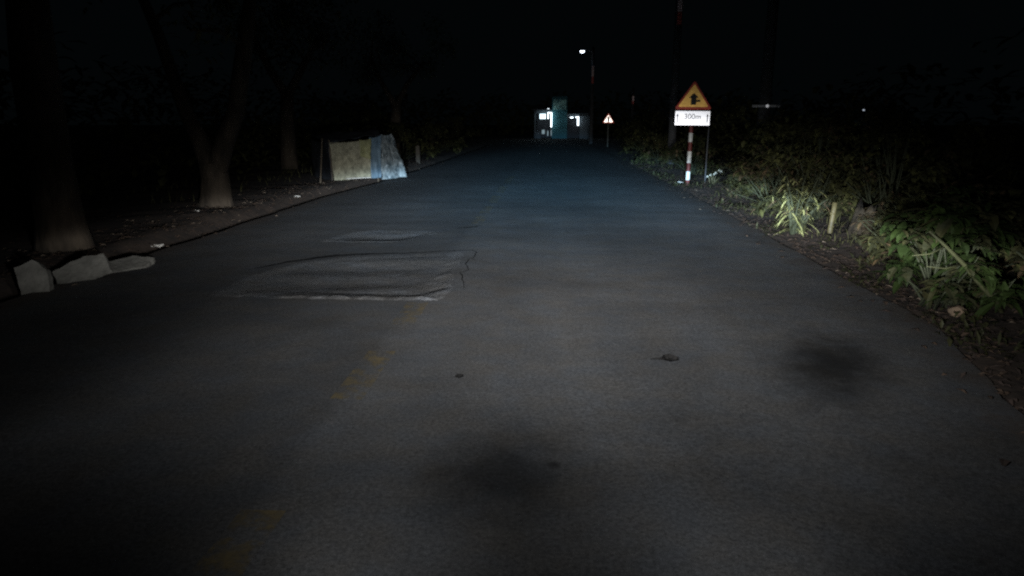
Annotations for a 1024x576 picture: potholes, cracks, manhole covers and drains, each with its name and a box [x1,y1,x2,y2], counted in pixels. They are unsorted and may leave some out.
crack [258,250,477,289]
